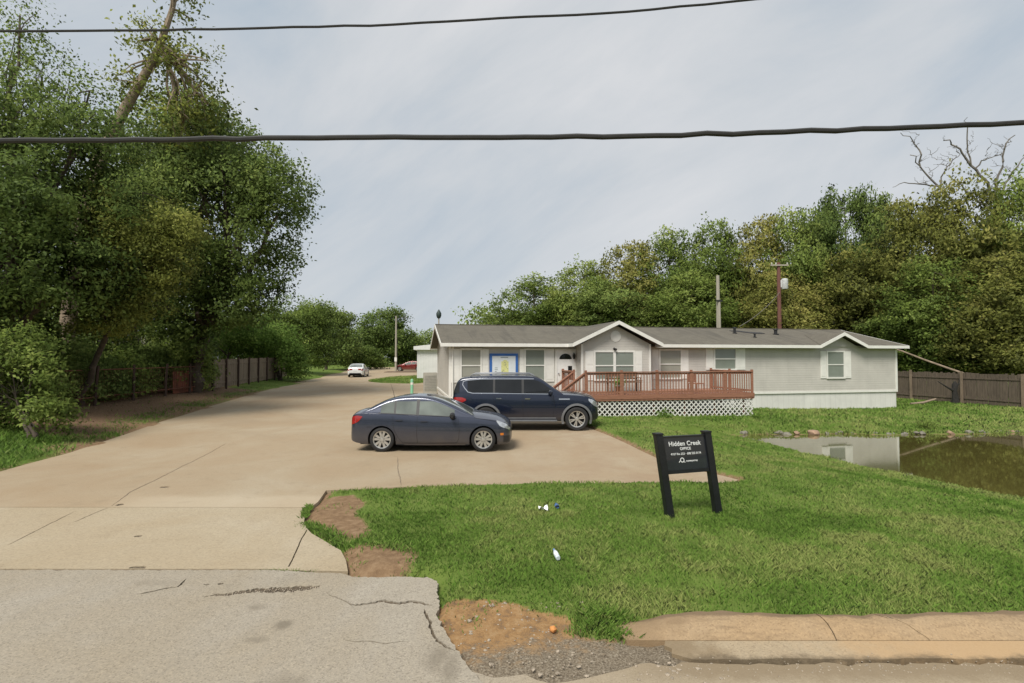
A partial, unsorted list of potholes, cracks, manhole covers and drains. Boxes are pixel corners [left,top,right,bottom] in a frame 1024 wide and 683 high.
crack [215,587,317,596]
crack [349,601,446,648]
